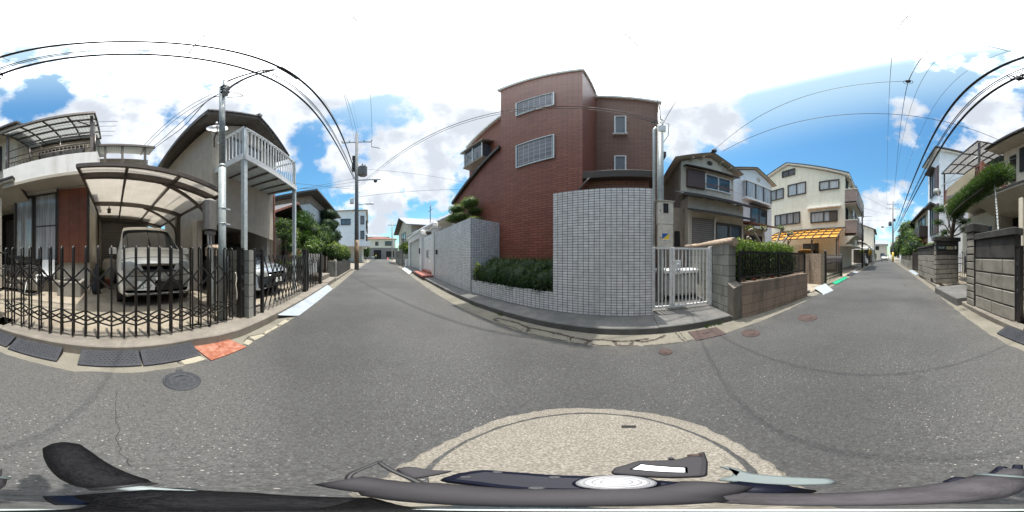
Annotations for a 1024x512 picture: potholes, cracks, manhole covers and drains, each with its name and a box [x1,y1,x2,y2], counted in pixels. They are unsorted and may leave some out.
manhole cover [741,329,760,337]
manhole cover [162,369,201,391]
crack [112,394,136,468]
crack [493,318,666,346]
